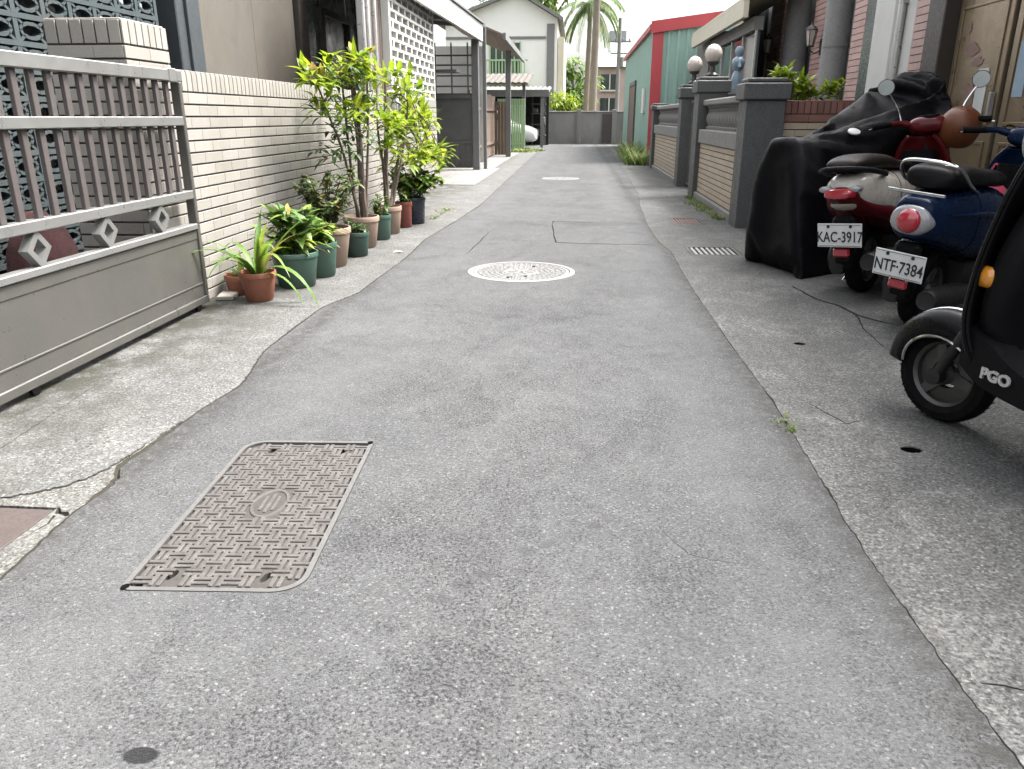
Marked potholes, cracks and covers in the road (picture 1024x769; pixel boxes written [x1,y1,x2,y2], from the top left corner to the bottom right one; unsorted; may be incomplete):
manhole cover [120,440,373,593]
drain grate [684,246,743,256]
manhole cover [468,262,575,282]
